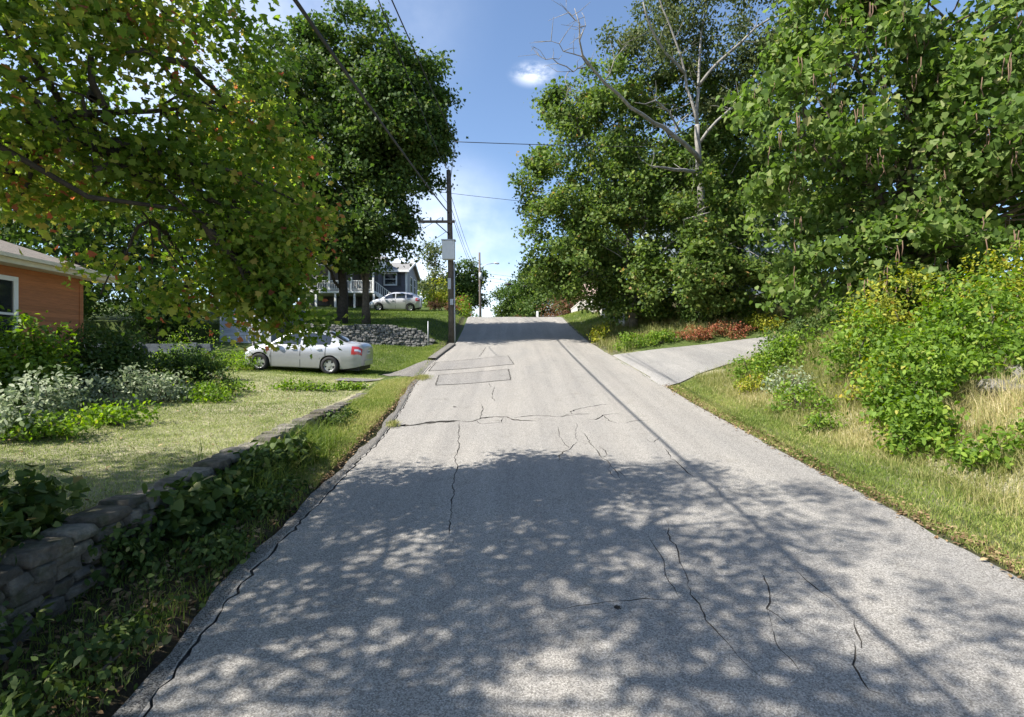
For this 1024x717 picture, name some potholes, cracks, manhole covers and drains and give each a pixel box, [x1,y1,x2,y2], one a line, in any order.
crack [797,571,881,694]
crack [143,345,646,717]
crack [517,520,800,682]
